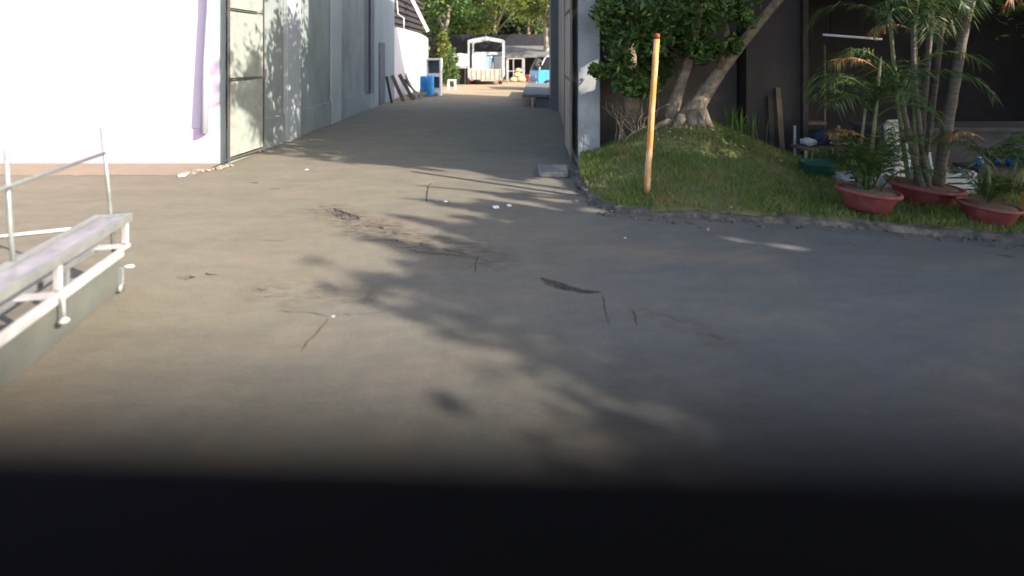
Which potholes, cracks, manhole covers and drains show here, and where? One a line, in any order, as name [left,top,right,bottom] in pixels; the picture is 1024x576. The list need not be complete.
pothole [322,208,360,221]
crack [257,288,396,352]
crack [356,224,495,271]
